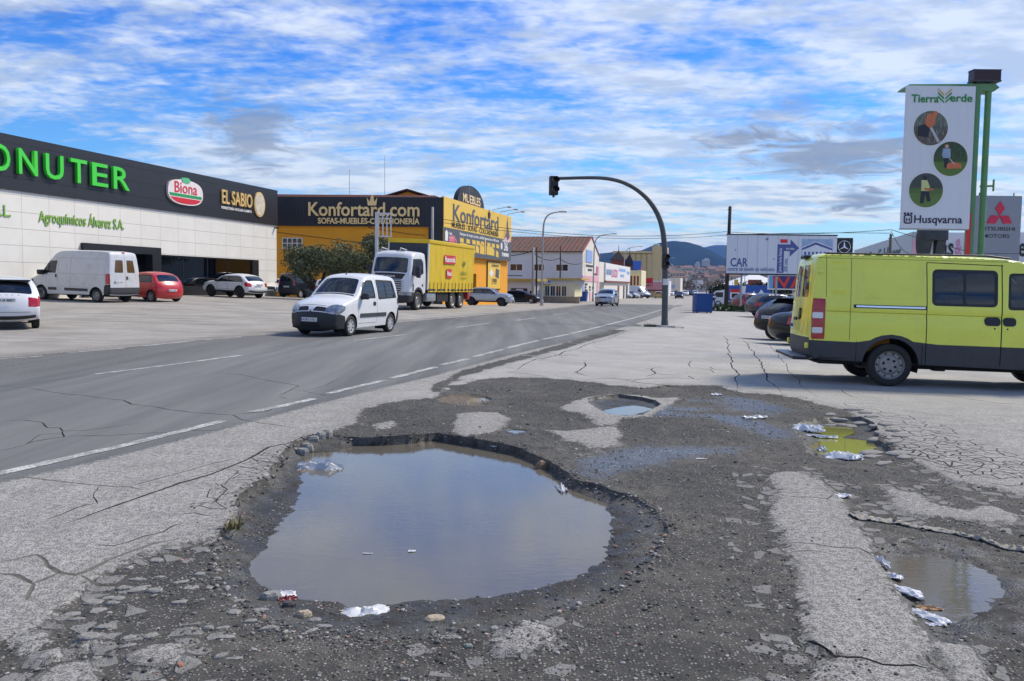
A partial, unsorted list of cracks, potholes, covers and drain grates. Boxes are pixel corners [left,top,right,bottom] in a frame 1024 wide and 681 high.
pothole [588,394,661,416]
crack [0,387,308,600]
pothole [215,432,669,642]
pothole [873,537,1024,646]
pothole [437,394,493,406]
pothole [792,416,892,462]
crack [506,331,714,387]
